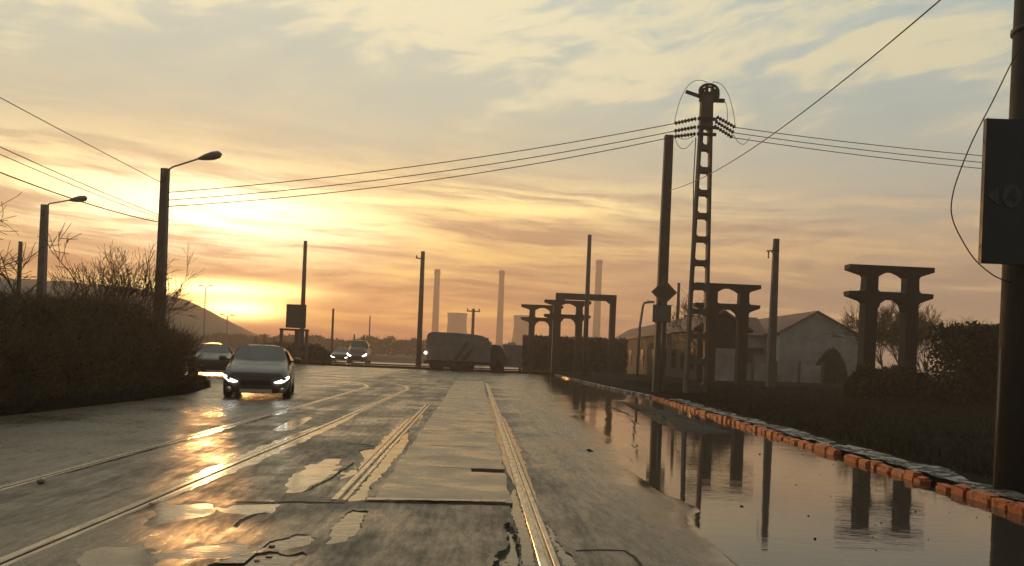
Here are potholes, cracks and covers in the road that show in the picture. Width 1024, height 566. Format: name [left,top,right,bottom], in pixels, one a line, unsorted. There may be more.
crack [575,549,643,566]
